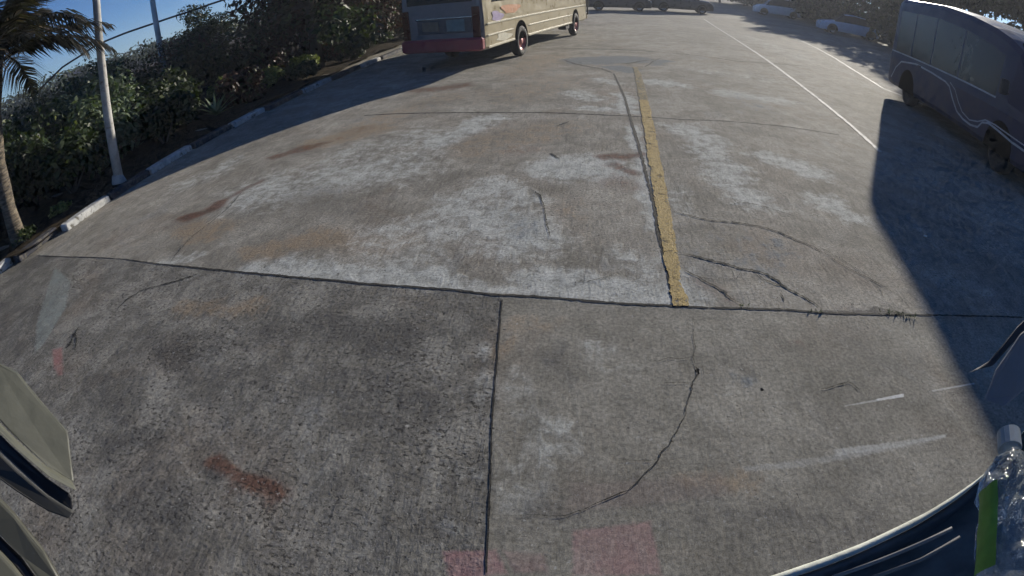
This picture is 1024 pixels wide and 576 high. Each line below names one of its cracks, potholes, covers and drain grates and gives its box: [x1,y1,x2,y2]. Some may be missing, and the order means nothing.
crack [674,202,900,297]
crack [118,272,201,308]
crack [681,252,817,305]
crack [516,313,704,516]
